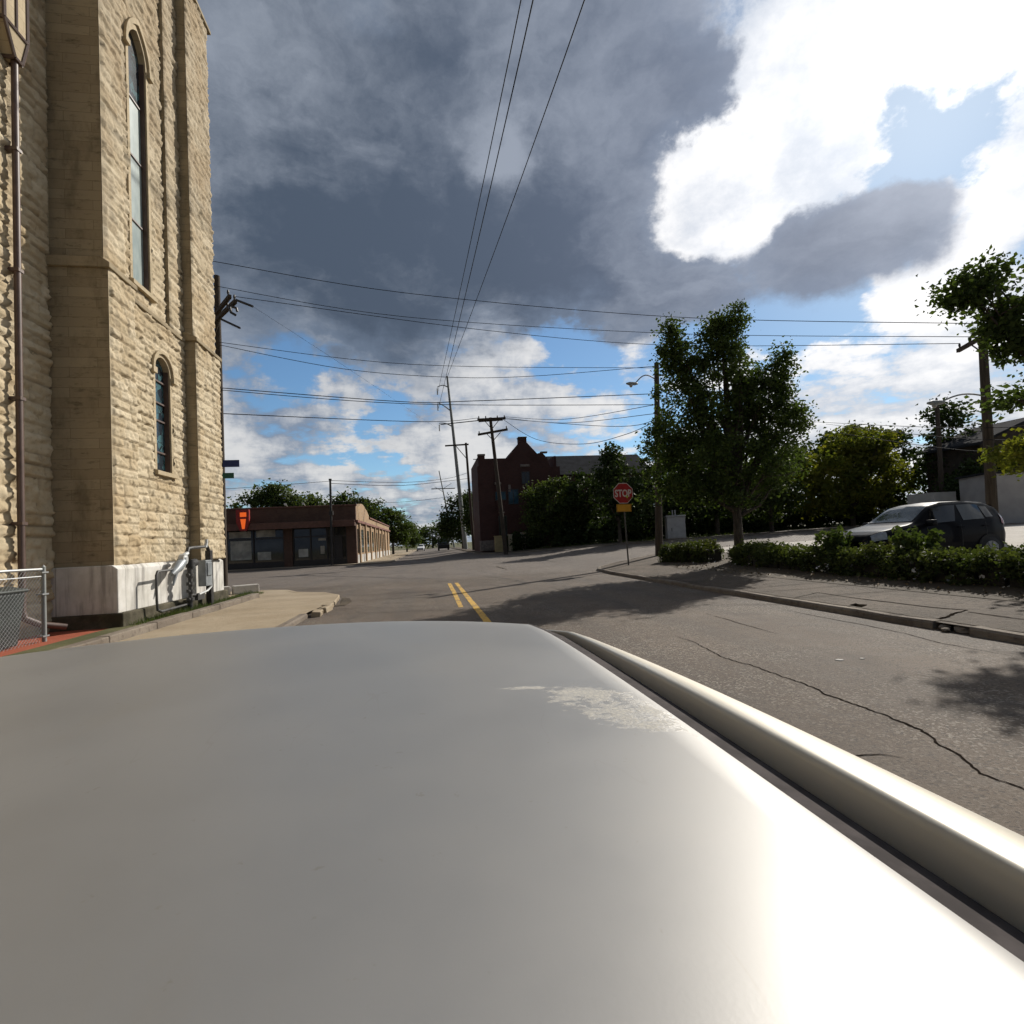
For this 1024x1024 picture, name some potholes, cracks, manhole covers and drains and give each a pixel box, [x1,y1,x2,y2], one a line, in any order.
crack [676,636,1024,789]
